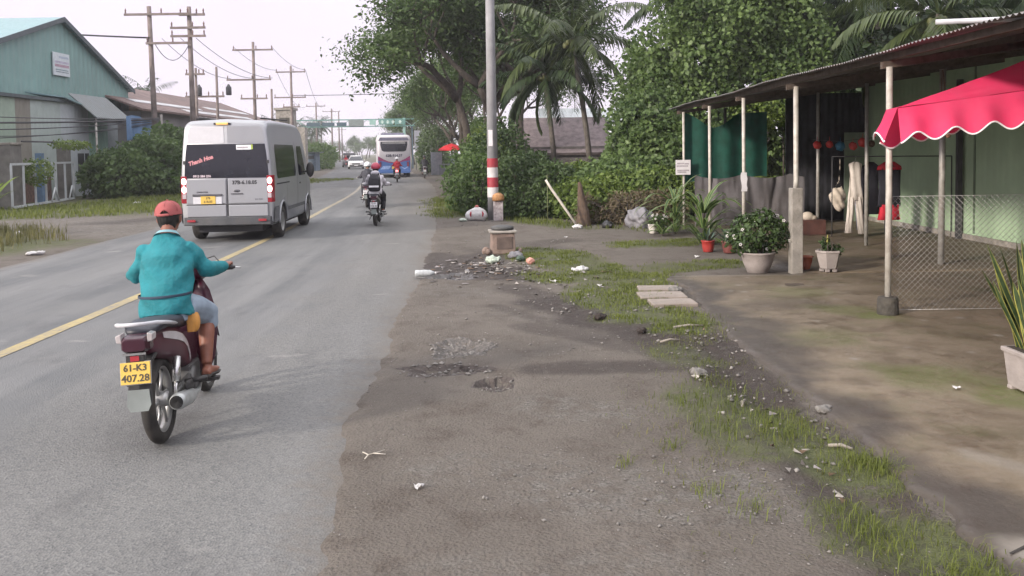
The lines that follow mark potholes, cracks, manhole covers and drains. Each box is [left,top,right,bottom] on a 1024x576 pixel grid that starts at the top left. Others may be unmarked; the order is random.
pothole [429,336,498,360]
pothole [470,376,515,393]
pothole [393,361,499,378]
